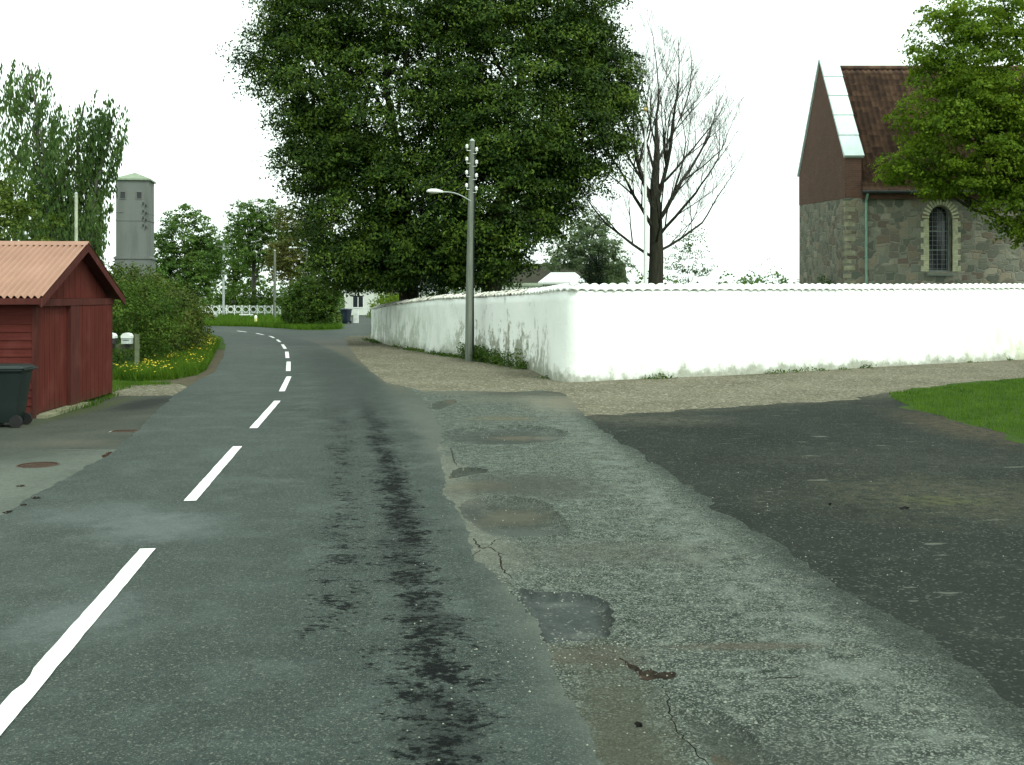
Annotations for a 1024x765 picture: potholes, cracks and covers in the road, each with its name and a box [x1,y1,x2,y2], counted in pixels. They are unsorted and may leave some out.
pothole [517,588,615,642]
crack [472,538,510,576]
crack [662,683,709,765]
pothole [427,399,456,409]
pothole [449,467,488,478]
pothole [619,658,677,681]
